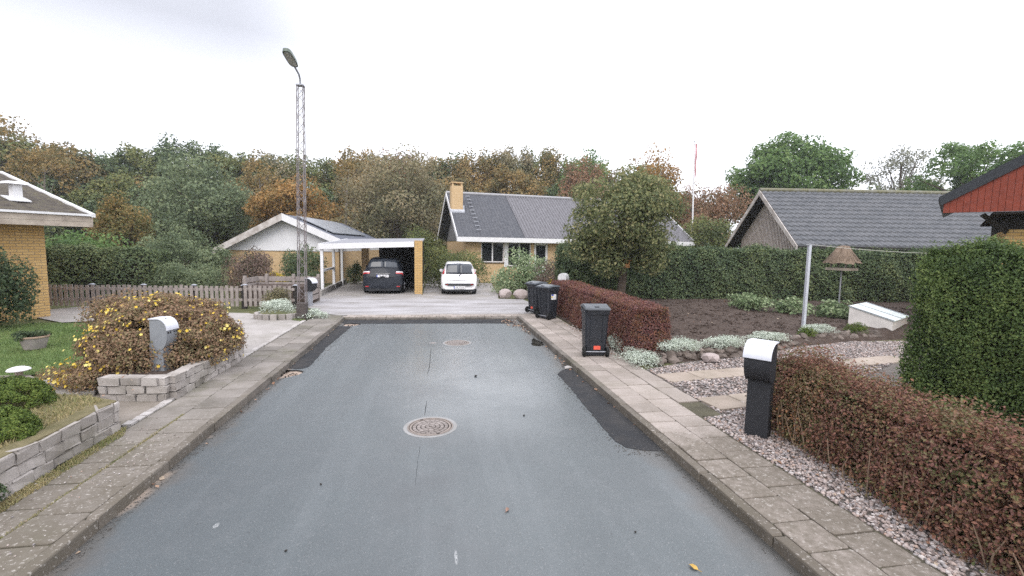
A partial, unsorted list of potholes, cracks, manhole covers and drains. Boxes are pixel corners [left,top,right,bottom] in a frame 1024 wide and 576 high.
manhole cover [403,417,457,438]
